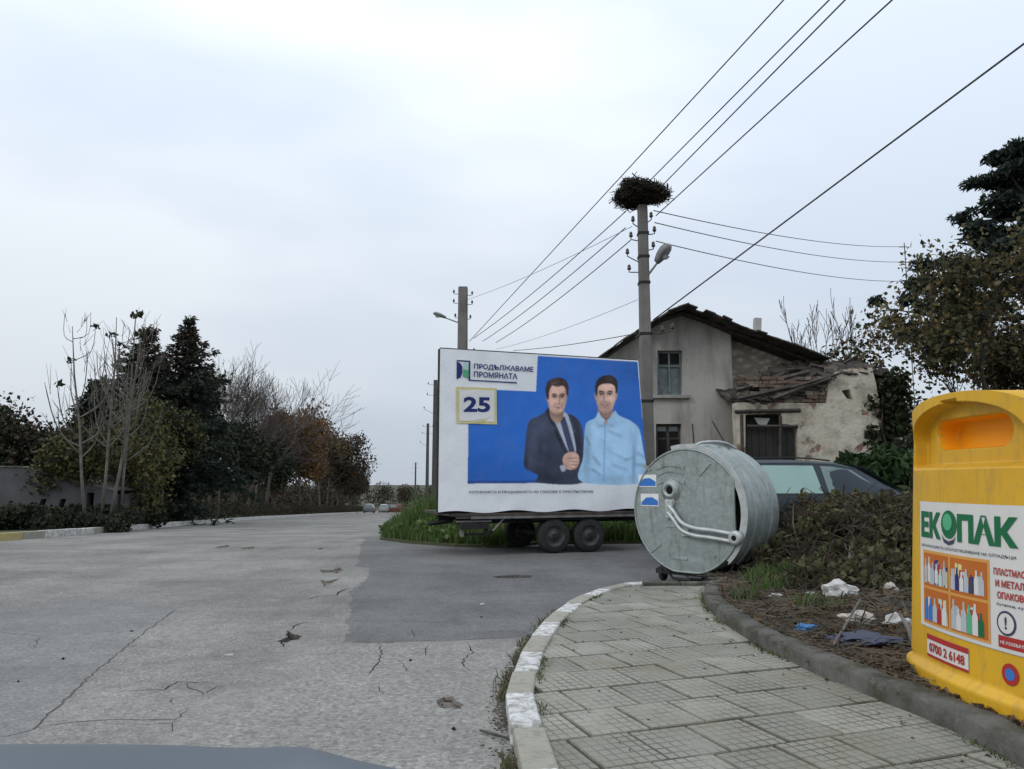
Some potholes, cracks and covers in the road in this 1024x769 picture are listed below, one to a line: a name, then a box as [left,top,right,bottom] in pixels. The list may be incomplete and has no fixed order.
crack [30,681,216,734]
pothole [436,697,464,709]
crack [369,644,407,693]
pothole [279,631,302,644]
